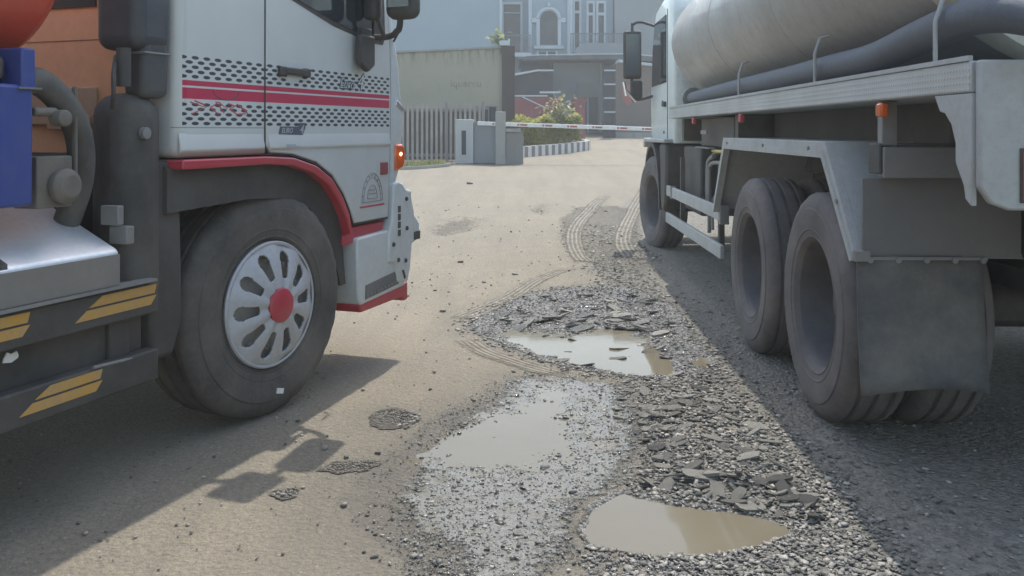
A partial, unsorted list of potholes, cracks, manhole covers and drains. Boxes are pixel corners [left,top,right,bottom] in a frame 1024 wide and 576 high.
pothole [469,285,712,379]
pothole [574,488,796,557]
pothole [694,354,720,367]
pothole [390,375,636,576]
